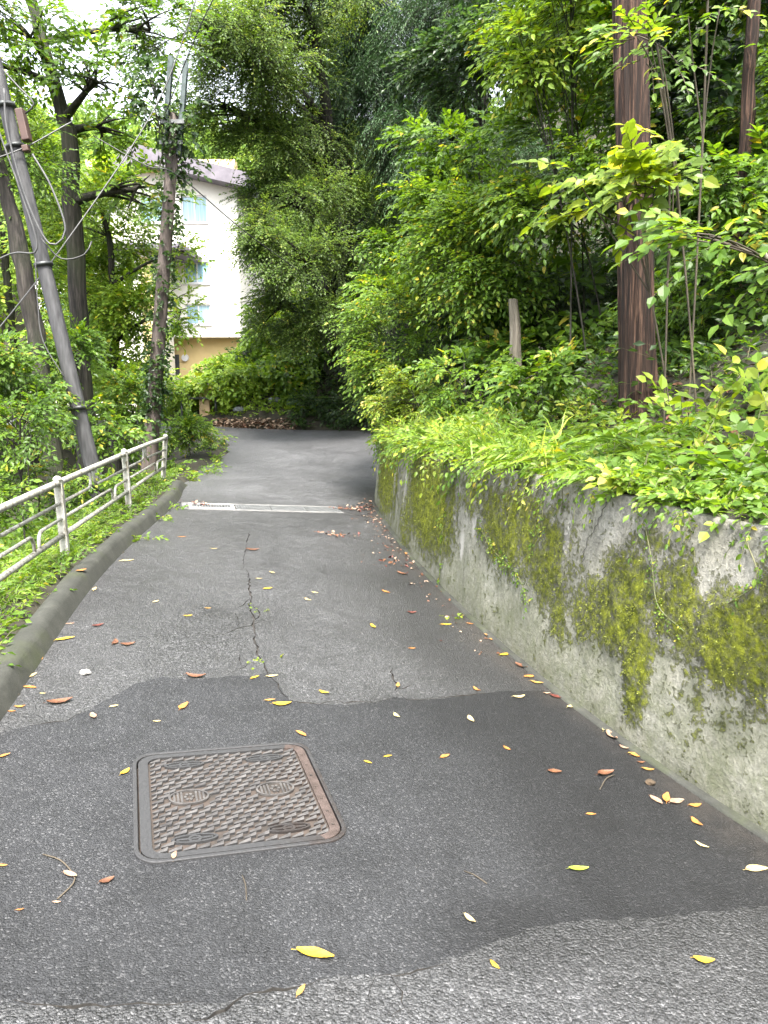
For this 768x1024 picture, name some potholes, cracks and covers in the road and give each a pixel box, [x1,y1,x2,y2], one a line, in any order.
crack [189,533,490,704]
crack [12,978,327,1022]
manhole cover [132,742,346,864]
drain grate [181,502,344,513]
crack [368,963,447,1015]
